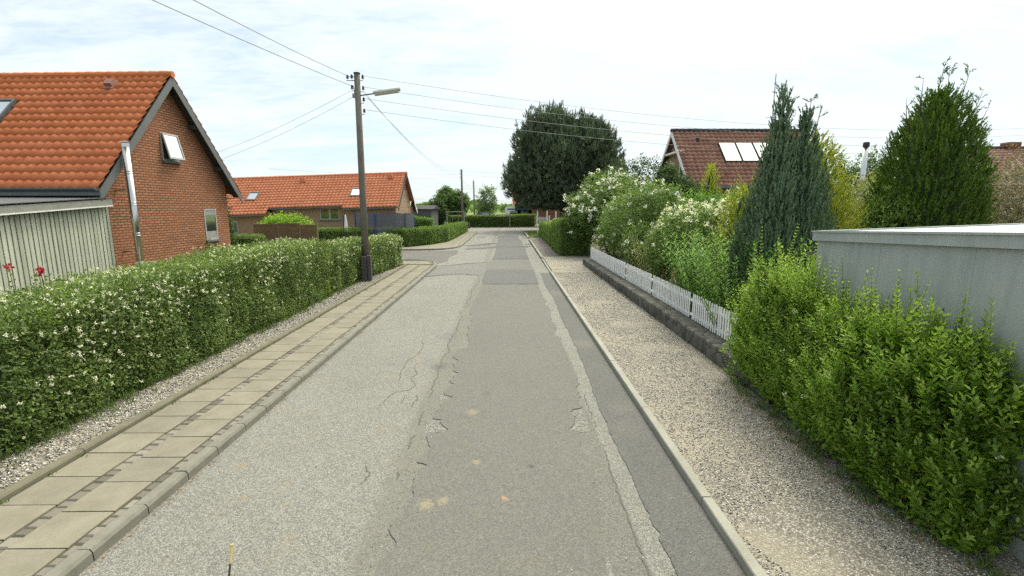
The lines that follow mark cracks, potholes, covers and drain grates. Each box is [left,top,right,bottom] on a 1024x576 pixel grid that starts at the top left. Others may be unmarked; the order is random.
crack [381,335,426,406]
